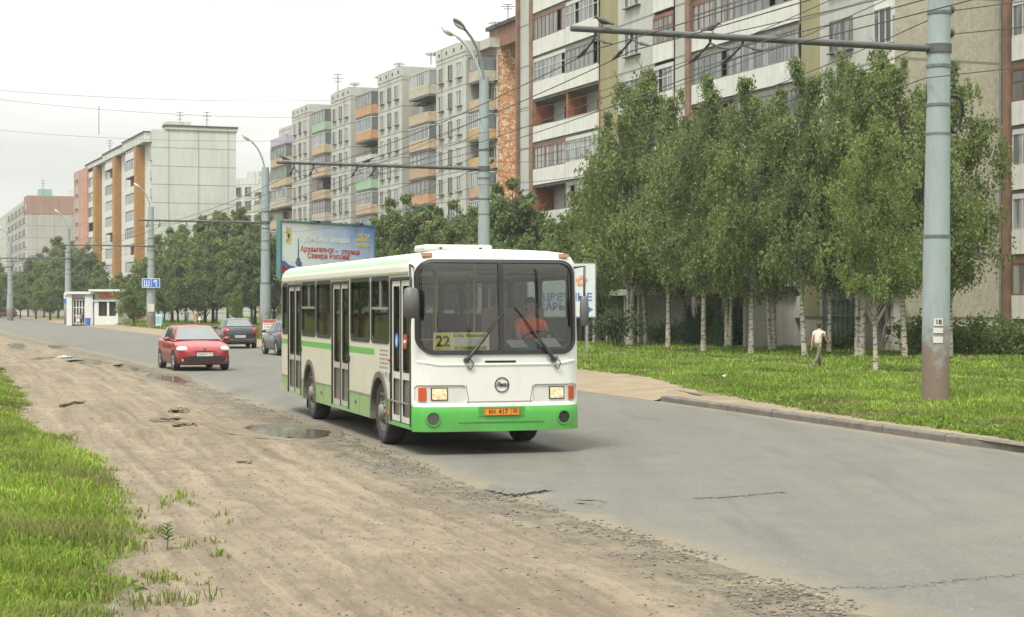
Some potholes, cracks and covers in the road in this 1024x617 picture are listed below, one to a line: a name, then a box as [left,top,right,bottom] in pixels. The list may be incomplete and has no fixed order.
crack [483,484,555,497]
pothole [126,372,196,385]
crack [801,573,1024,593]
pothole [215,422,345,442]
pothole [0,342,40,350]
